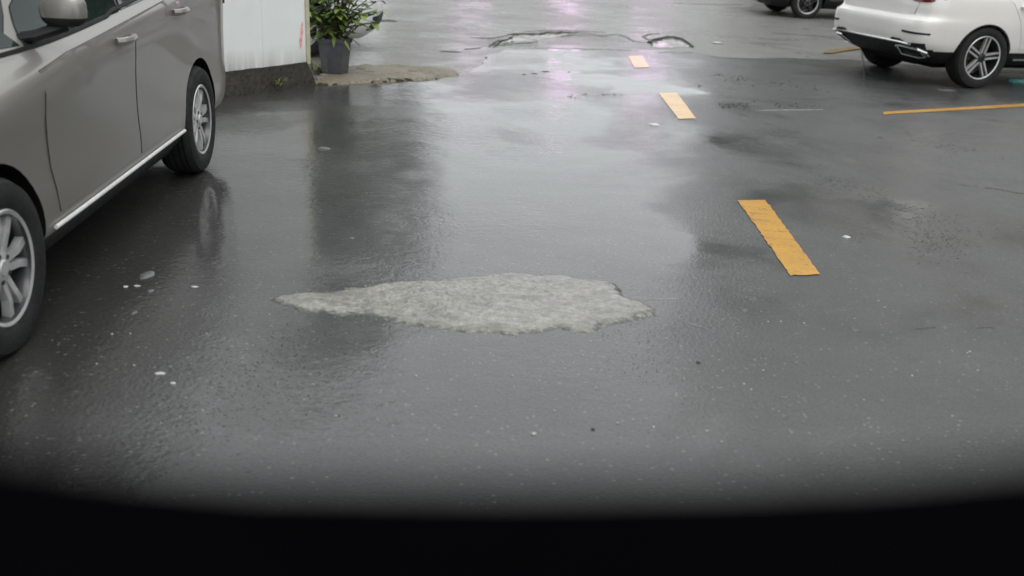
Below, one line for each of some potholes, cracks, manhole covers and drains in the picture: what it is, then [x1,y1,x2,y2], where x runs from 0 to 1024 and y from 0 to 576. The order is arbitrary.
crack [466,30,693,53]
